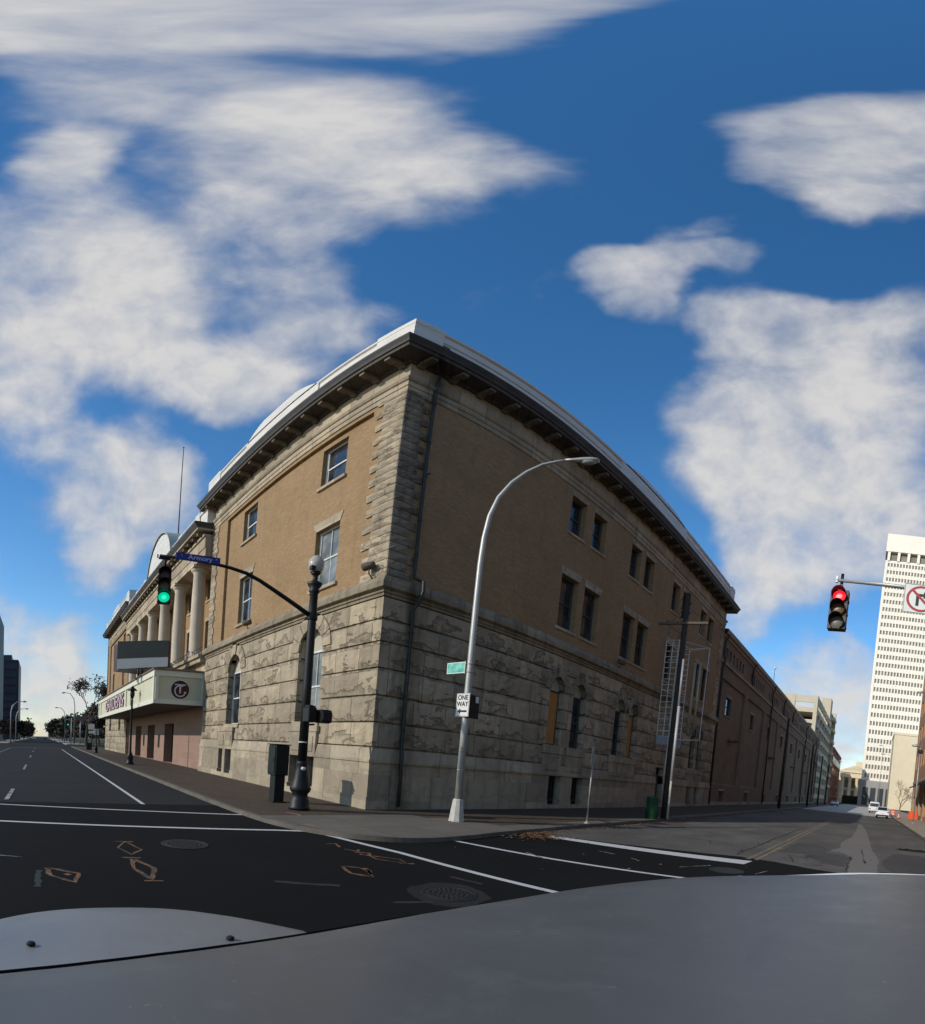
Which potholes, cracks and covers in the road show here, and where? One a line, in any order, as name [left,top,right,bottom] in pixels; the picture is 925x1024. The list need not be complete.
manhole cover [161,839,209,849]
crack [735,828,866,873]
manhole cover [420,886,477,902]
